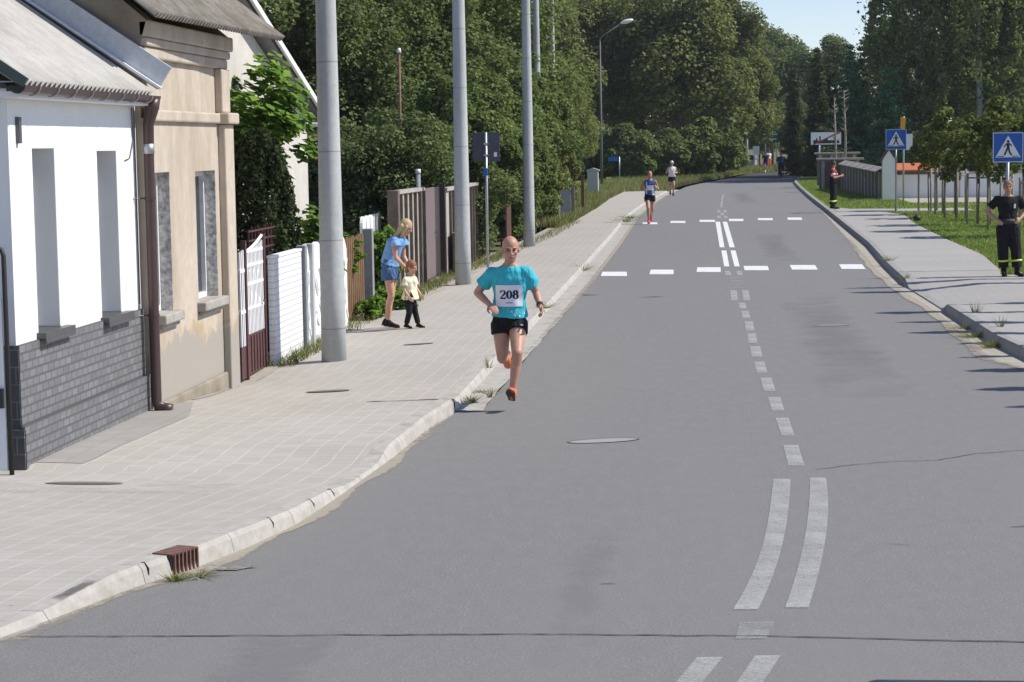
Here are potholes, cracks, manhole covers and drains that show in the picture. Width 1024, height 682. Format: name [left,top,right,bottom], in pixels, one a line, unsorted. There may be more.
drain grate [152,545,199,575]
crack [815,450,1013,470]
